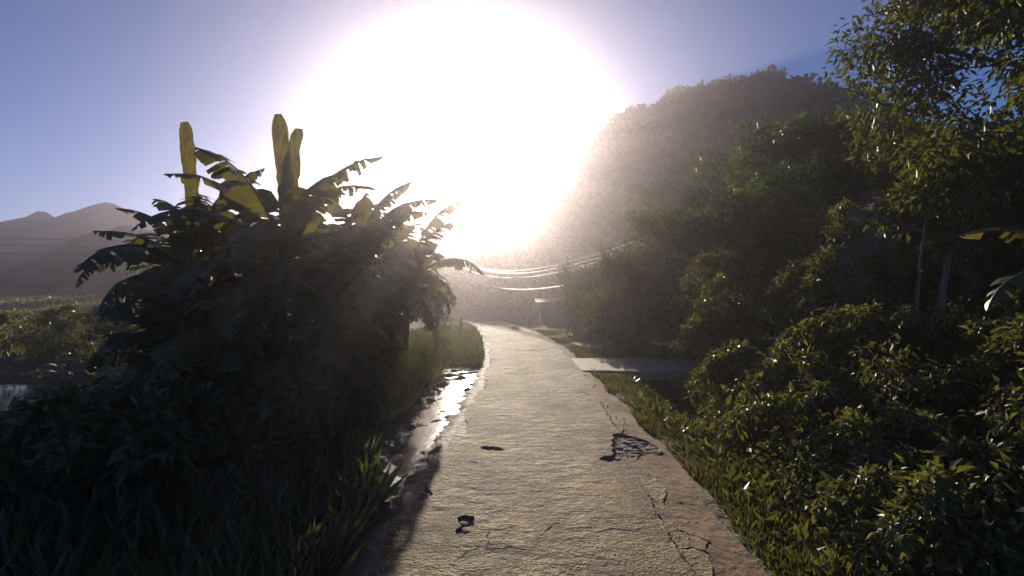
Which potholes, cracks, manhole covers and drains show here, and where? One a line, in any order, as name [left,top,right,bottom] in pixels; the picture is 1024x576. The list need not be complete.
pothole [455,515,475,534]
crack [596,486,714,576]
pothole [599,433,665,462]
crack [441,522,560,565]
